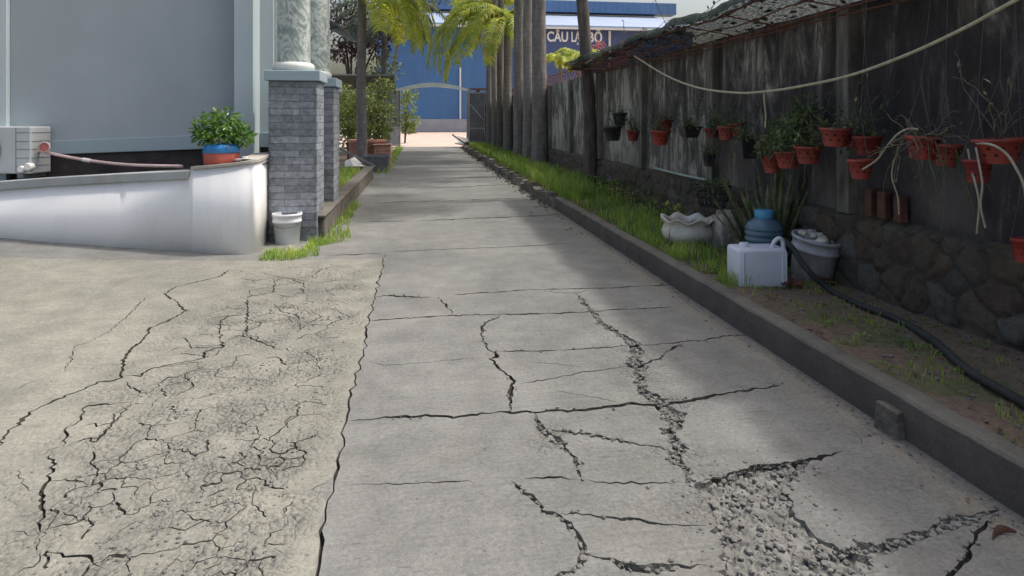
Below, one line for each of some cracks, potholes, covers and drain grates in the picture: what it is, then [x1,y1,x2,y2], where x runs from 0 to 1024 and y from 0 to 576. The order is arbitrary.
crack [0,243,842,576]
pothole [646,450,889,576]
crack [828,509,1000,576]
